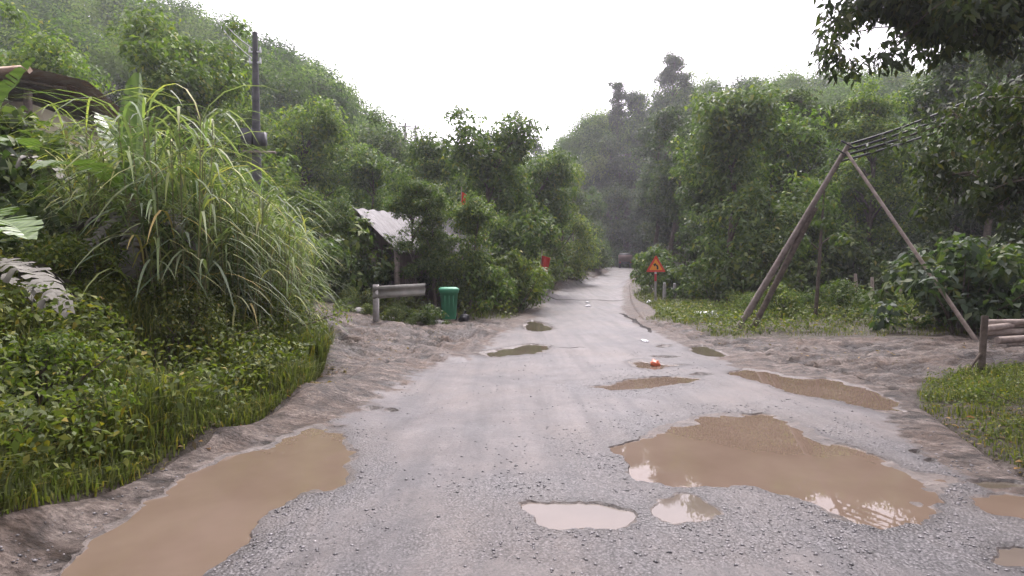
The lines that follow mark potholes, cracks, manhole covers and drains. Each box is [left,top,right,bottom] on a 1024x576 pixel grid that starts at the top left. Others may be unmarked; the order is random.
pothole [479,343,553,357]
pothole [608,412,959,530]
pothole [688,344,729,357]
pothole [991,546,1024,567]
pothole [522,320,554,332]
pothole [56,423,360,576]
pothole [589,376,702,390]
pothole [727,368,907,412]
pothole [628,359,687,370]
pothole [518,500,638,530]
pothole [968,491,1024,519]
